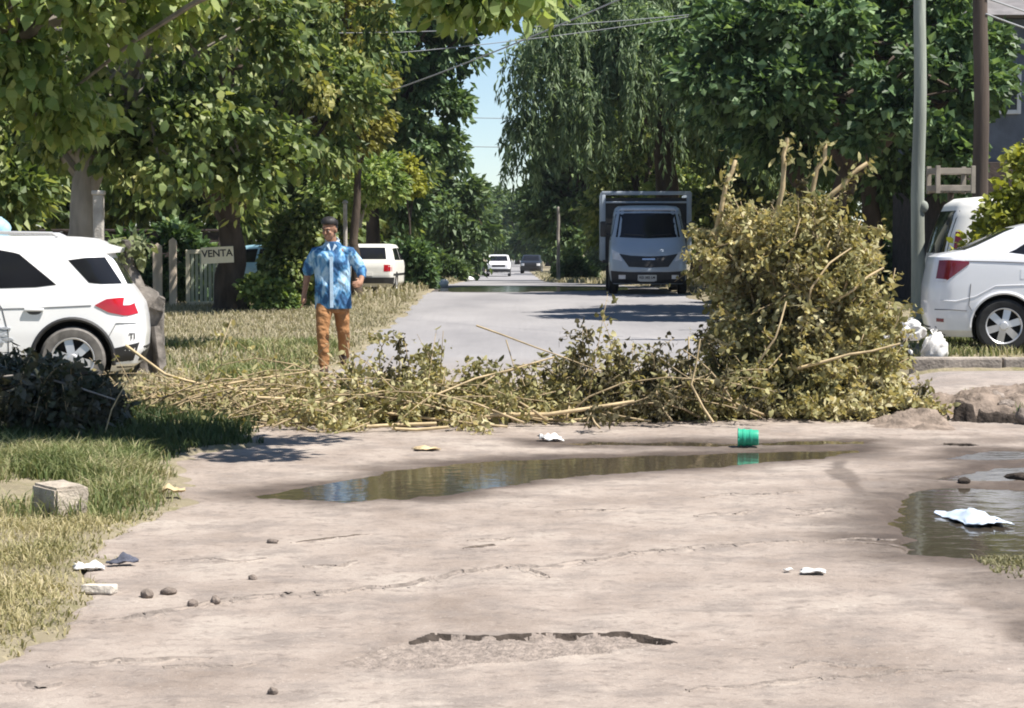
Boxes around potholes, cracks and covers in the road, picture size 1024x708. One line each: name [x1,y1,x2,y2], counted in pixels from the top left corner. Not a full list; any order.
crack [65,534,906,627]
pothole [331,631,686,675]
